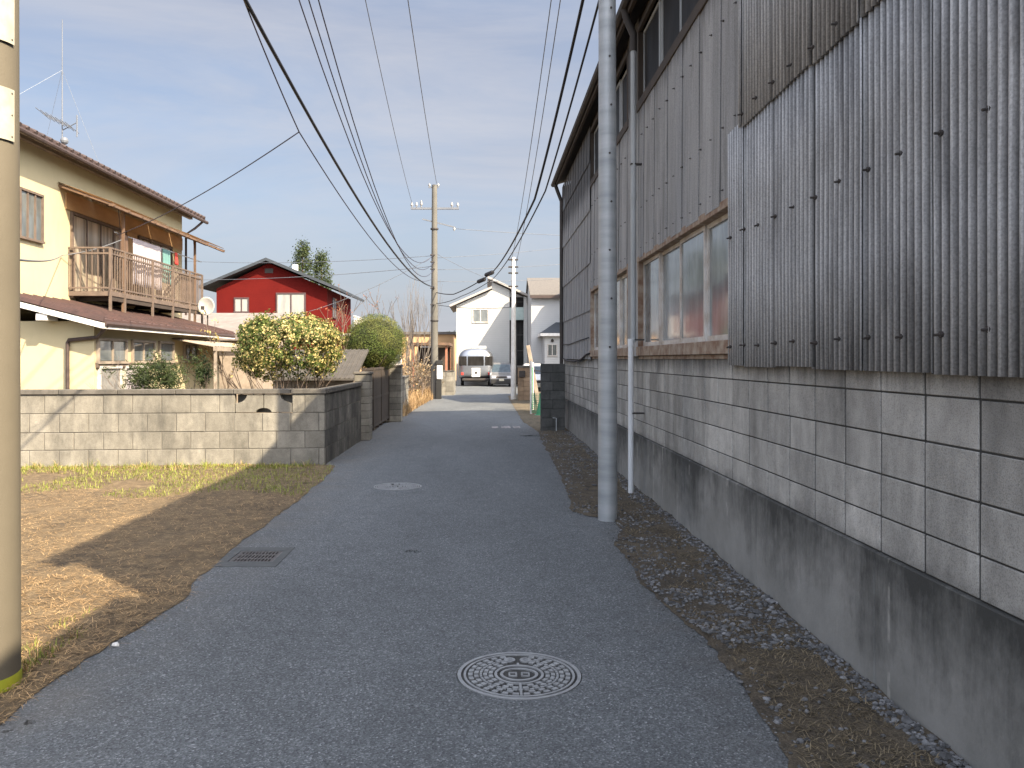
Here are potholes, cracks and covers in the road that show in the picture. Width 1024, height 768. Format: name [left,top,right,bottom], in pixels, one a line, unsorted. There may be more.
drain grate [213,547,295,567]
manhole cover [457,652,581,700]
